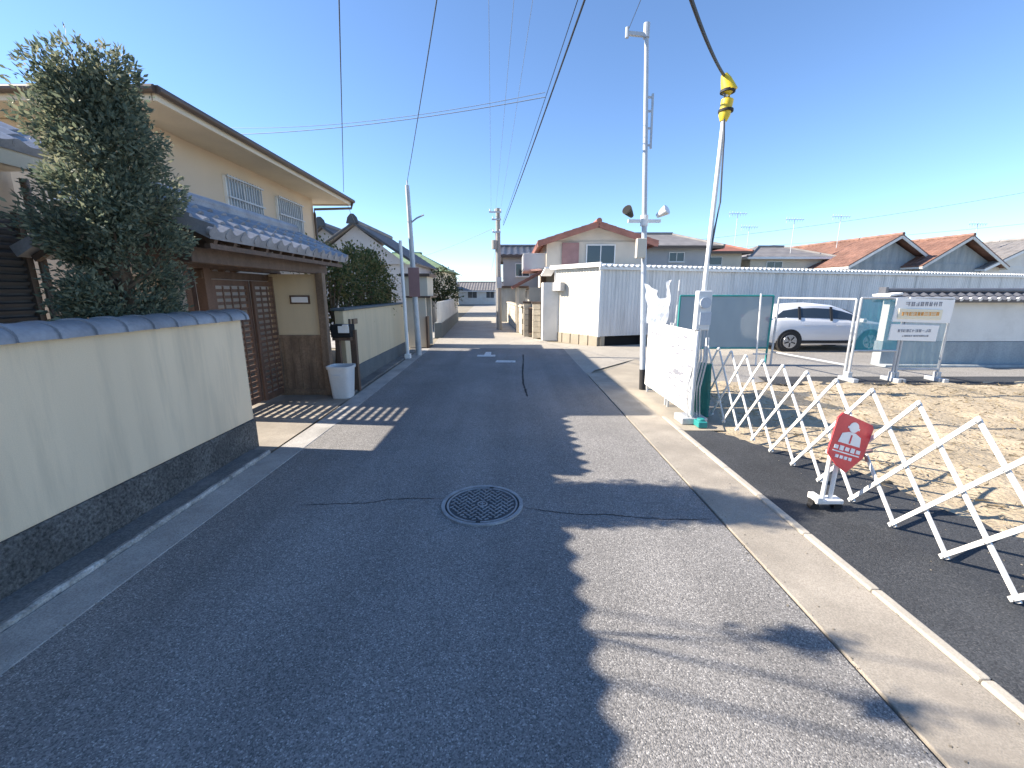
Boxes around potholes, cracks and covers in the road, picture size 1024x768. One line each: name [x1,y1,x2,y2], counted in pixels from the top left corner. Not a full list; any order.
crack [529,508,711,520]
manhole cover [441,485,523,527]
